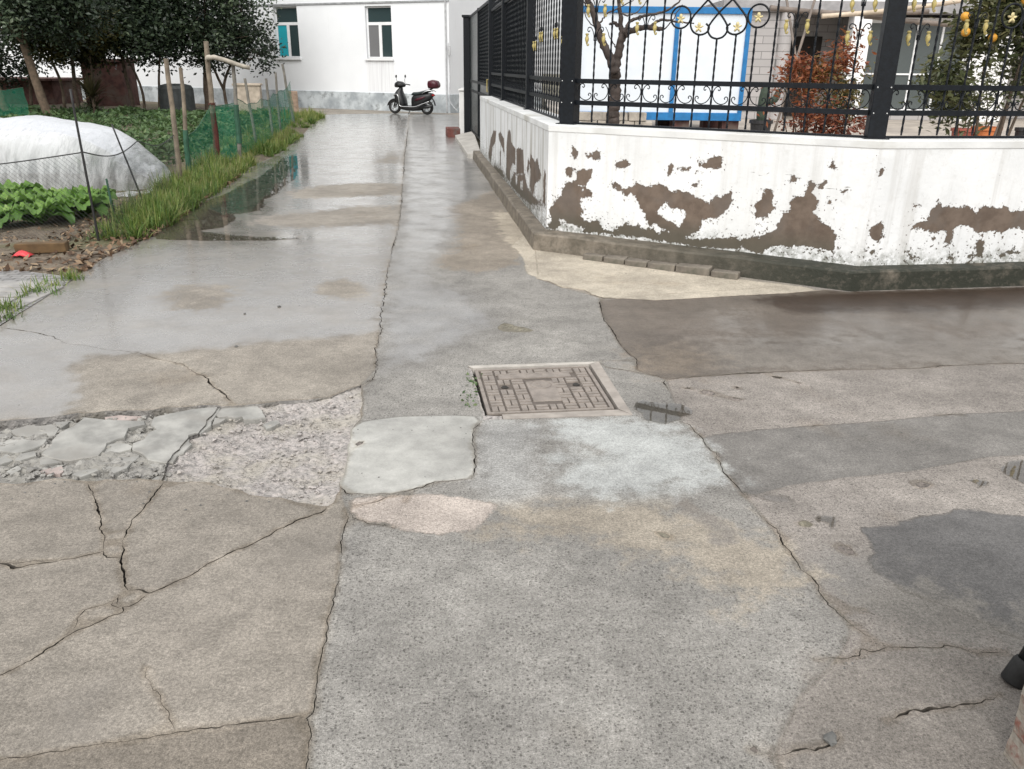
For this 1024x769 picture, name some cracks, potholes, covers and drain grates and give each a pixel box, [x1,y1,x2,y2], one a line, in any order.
crack [367,132,408,382]
crack [686,423,1002,659]
crack [779,738,840,756]
manhole cover [468,361,632,420]
crack [0,328,327,675]
pothole [161,385,363,506]
crack [887,695,998,720]
